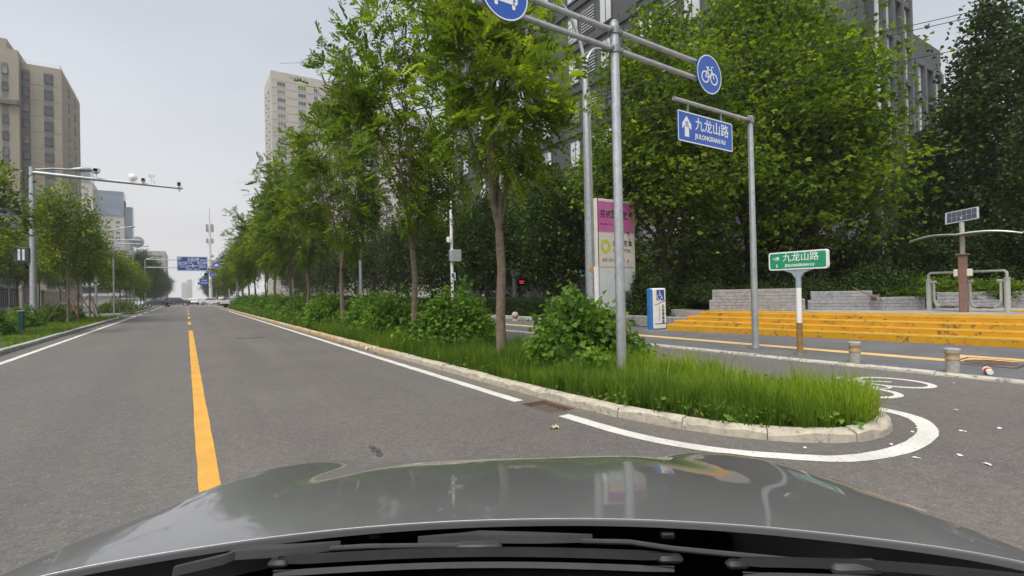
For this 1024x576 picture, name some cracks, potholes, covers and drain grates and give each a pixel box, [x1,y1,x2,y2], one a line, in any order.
drain grate [521,400,574,414]
